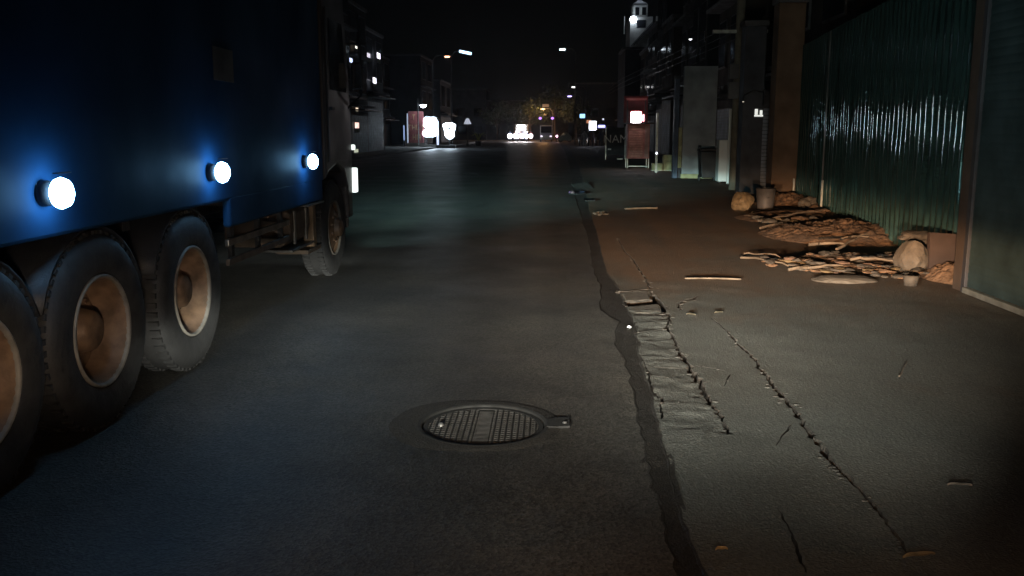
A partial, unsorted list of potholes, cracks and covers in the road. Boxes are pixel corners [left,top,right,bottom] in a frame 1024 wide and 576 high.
crack [616,238,907,573]
manhole cover [389,400,570,452]
